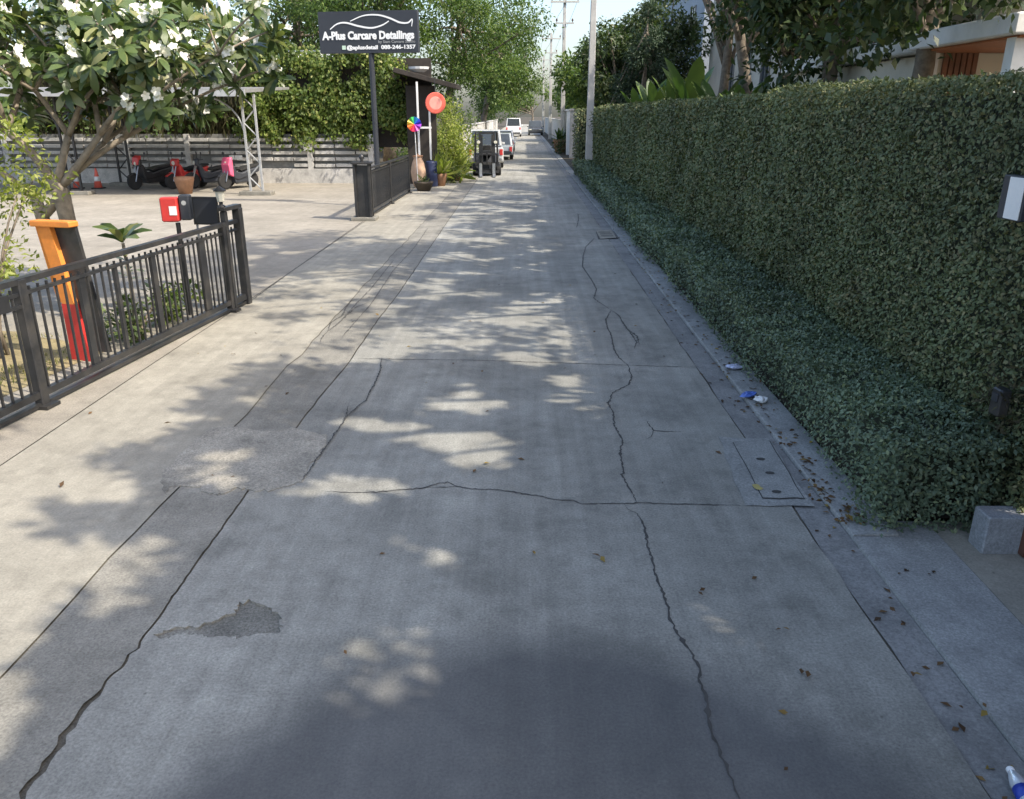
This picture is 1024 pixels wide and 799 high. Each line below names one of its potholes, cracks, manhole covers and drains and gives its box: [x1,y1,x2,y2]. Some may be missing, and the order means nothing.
crack [304,359,382,476]
crack [322,214,740,799]
pothole [153,599,284,639]
